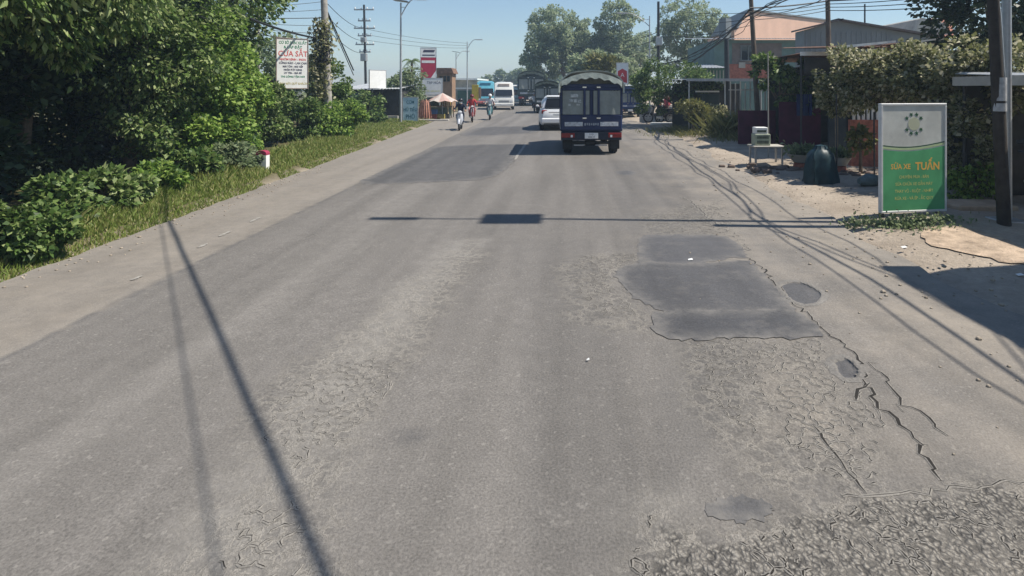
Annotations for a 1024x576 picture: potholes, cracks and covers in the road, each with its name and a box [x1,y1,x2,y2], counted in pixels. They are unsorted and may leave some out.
pothole [825,354,869,383]
crack [219,357,396,576]
crack [628,196,1024,576]
